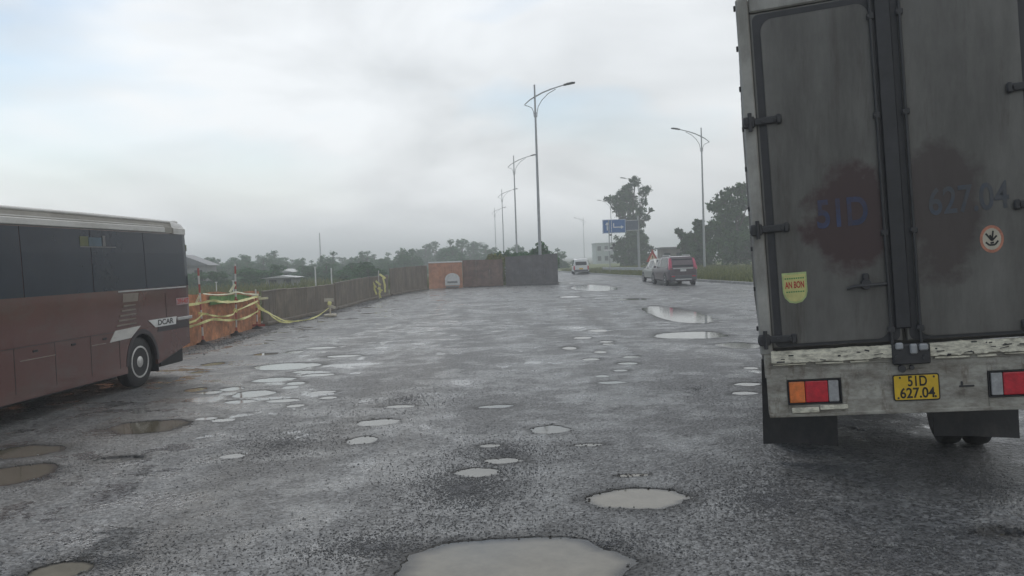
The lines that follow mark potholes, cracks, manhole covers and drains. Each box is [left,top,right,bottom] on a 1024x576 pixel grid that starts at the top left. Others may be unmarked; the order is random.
pothole [0,444,68,459]
pothole [356,418,401,426]
pothole [23,558,97,576]
pothole [346,435,379,445]
pothole [105,419,194,435]
pothole [654,331,729,339]
pothole [584,487,694,510]
pothole [529,423,572,434]
pothole [641,306,714,324]
pothole [393,535,641,576]
pothole [0,462,60,486]
pothole [450,466,501,478]
